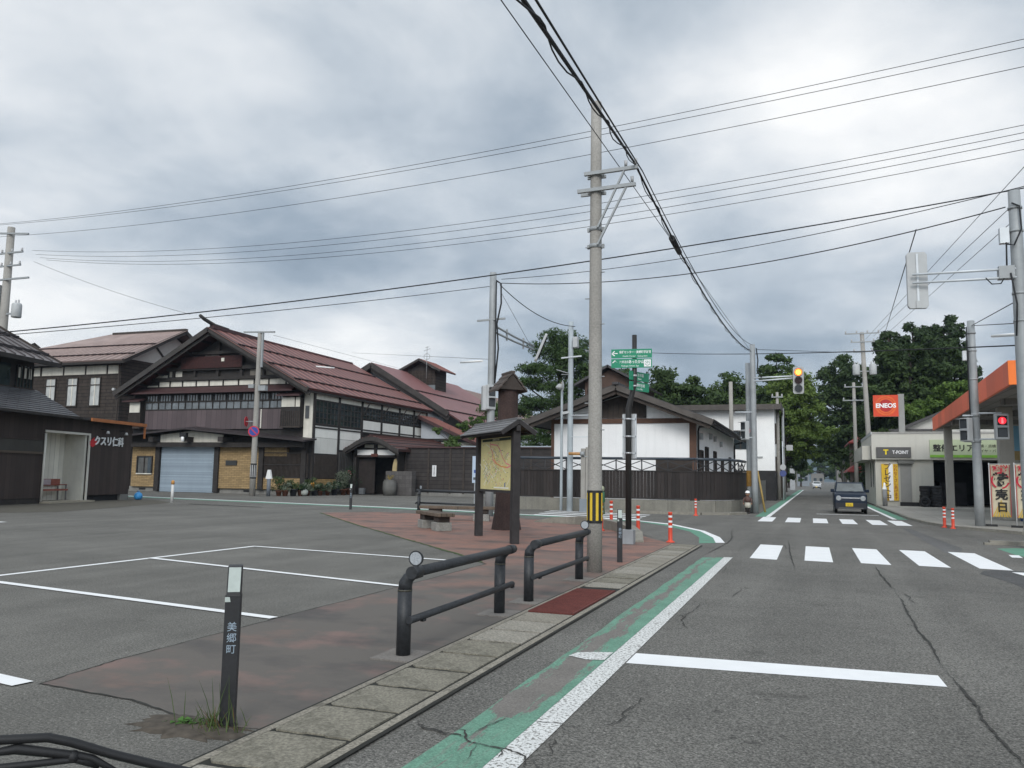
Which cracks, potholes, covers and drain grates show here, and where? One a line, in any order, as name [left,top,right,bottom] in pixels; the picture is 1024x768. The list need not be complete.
crack [876,568,1024,765]
crack [417,695,670,768]
